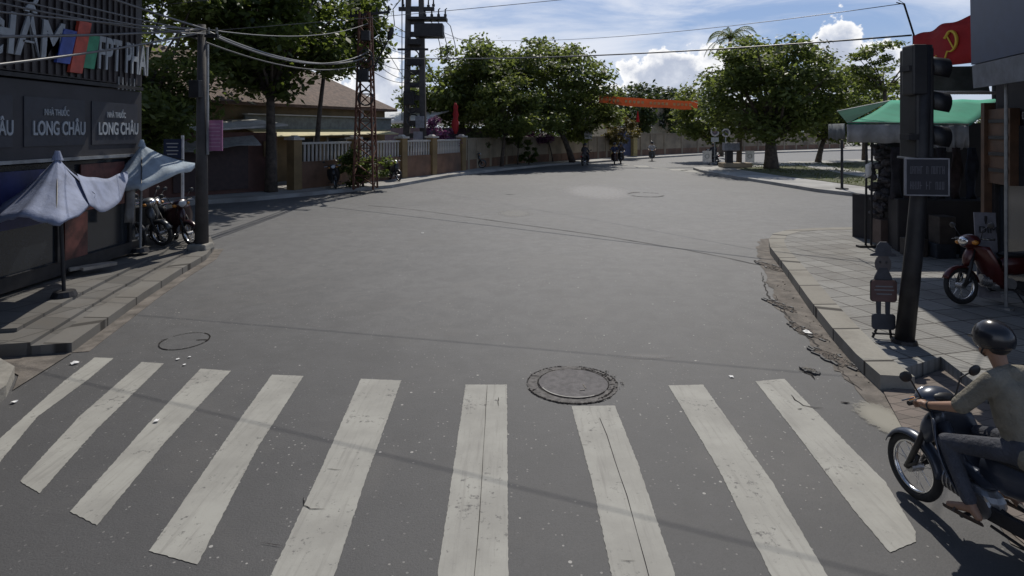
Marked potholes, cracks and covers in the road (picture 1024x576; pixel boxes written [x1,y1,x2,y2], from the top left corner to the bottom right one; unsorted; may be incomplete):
crack [600,419,649,576]
manhole cover [158,332,211,350]
manhole cover [527,366,624,404]
crack [474,394,499,576]
